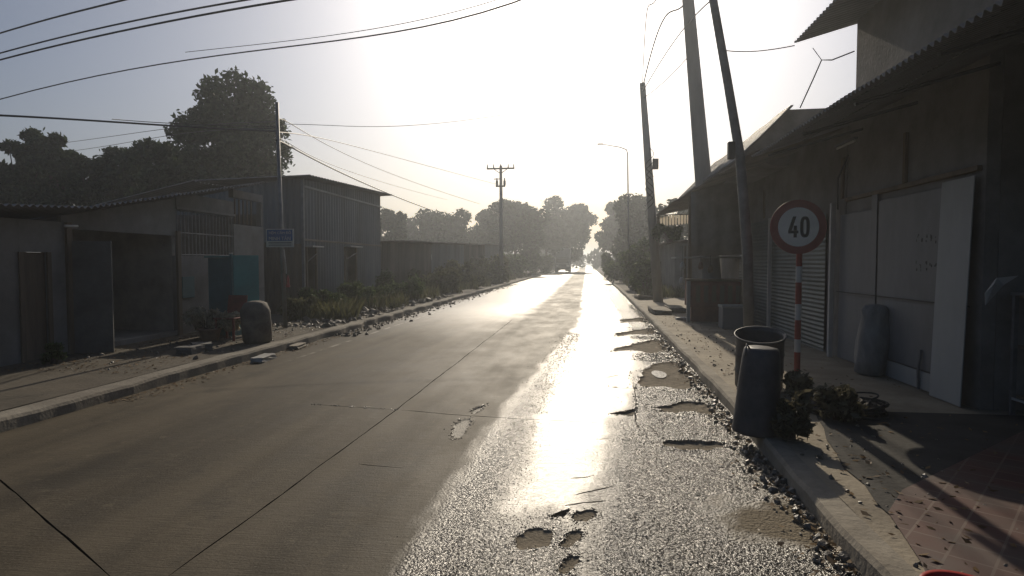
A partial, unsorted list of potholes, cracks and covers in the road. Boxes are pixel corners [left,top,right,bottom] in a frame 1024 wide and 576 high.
pothole [558,555,582,574]
pothole [662,440,724,450]
pothole [637,362,698,389]
pothole [657,401,716,414]
pothole [571,509,598,522]
pothole [614,339,667,353]
pothole [450,419,471,438]
pothole [615,328,655,336]
pothole [515,528,553,550]
pothole [557,530,583,548]
